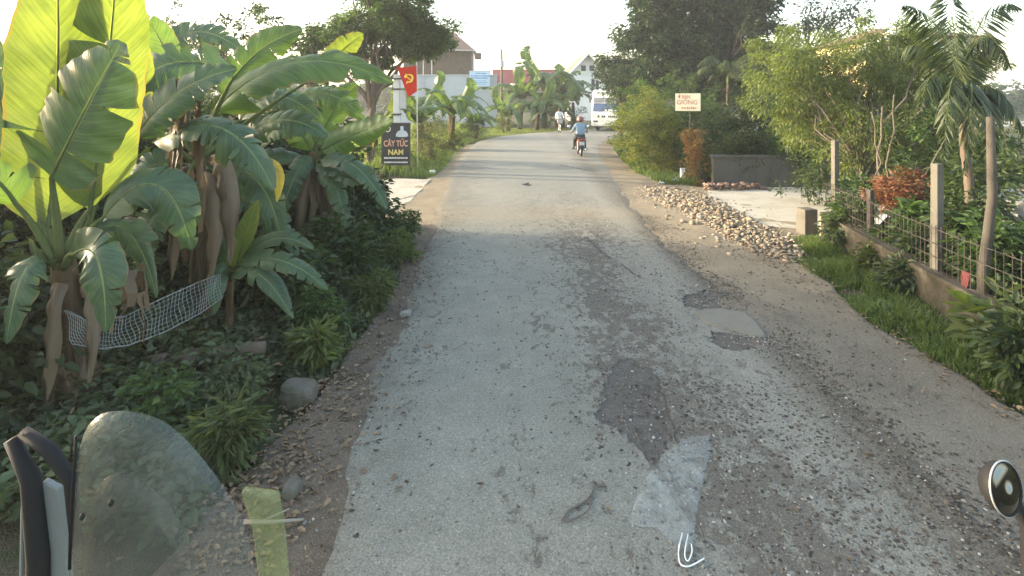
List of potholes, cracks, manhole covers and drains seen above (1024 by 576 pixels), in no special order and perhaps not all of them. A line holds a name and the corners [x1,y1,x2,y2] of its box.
pothole [705,330,763,354]
pothole [678,289,752,310]
crack [583,236,644,279]
